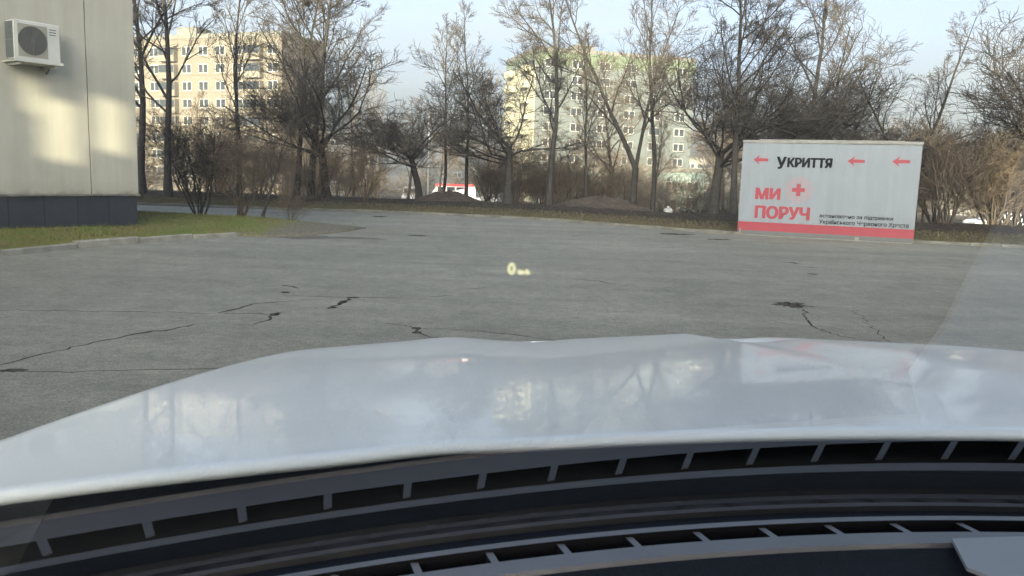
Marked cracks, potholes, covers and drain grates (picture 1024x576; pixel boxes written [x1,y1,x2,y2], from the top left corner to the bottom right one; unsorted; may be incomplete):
crack [775,308,890,342]
crack [0,285,398,373]
crack [386,323,550,340]
